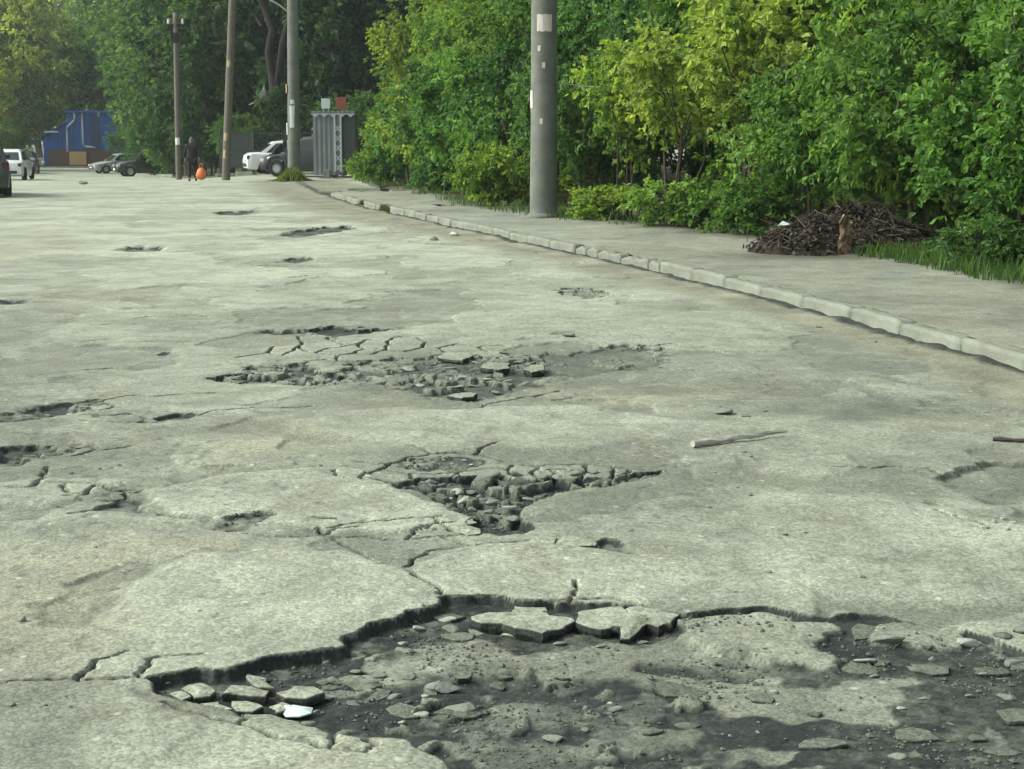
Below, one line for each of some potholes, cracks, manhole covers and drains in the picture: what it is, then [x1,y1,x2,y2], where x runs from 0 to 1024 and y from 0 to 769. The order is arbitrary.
crack [934,508,991,525]
pothole [273,256,317,264]
pothole [252,325,407,338]
pothole [553,287,613,299]
pothole [334,352,572,403]
crack [241,515,599,595]
crack [329,441,647,483]
crack [465,390,576,408]
pothole [204,361,353,387]
pothole [142,593,1024,769]
pothole [274,225,358,238]
pothole [358,468,672,536]
